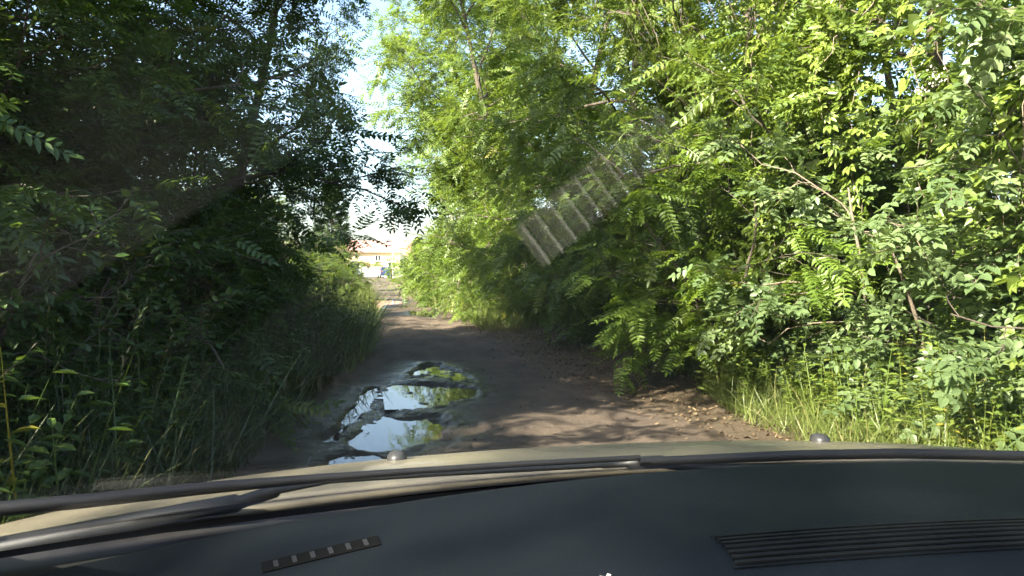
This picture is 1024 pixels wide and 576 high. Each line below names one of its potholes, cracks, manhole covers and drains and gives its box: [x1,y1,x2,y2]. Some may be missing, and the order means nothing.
pothole [381,380,485,412]
pothole [318,449,387,466]
pothole [400,361,480,383]
pothole [339,411,458,452]
pothole [309,386,381,442]
